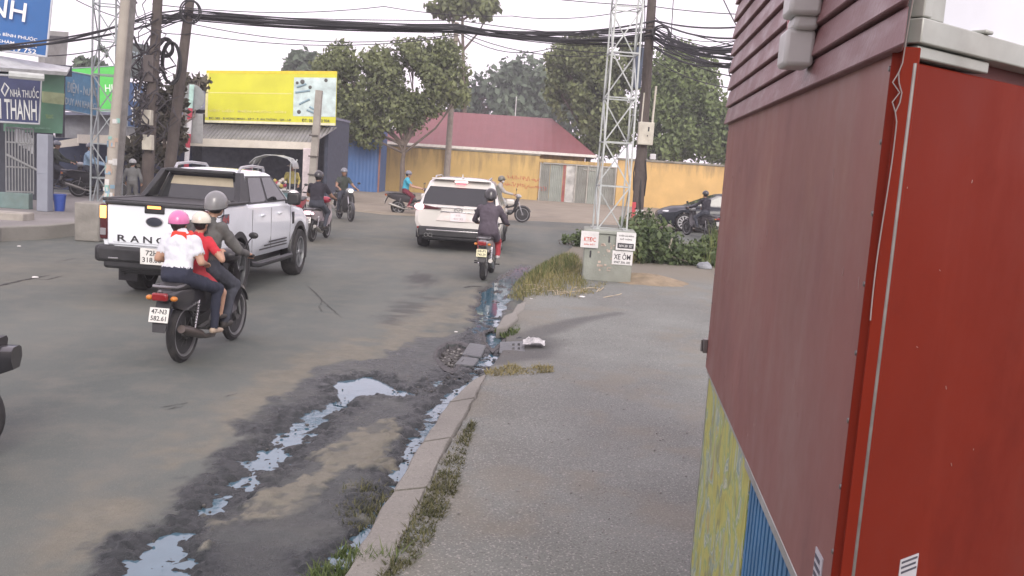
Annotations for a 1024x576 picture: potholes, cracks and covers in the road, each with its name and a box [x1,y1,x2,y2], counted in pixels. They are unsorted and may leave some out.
pothole [482,328,506,353]
pothole [433,341,469,374]
